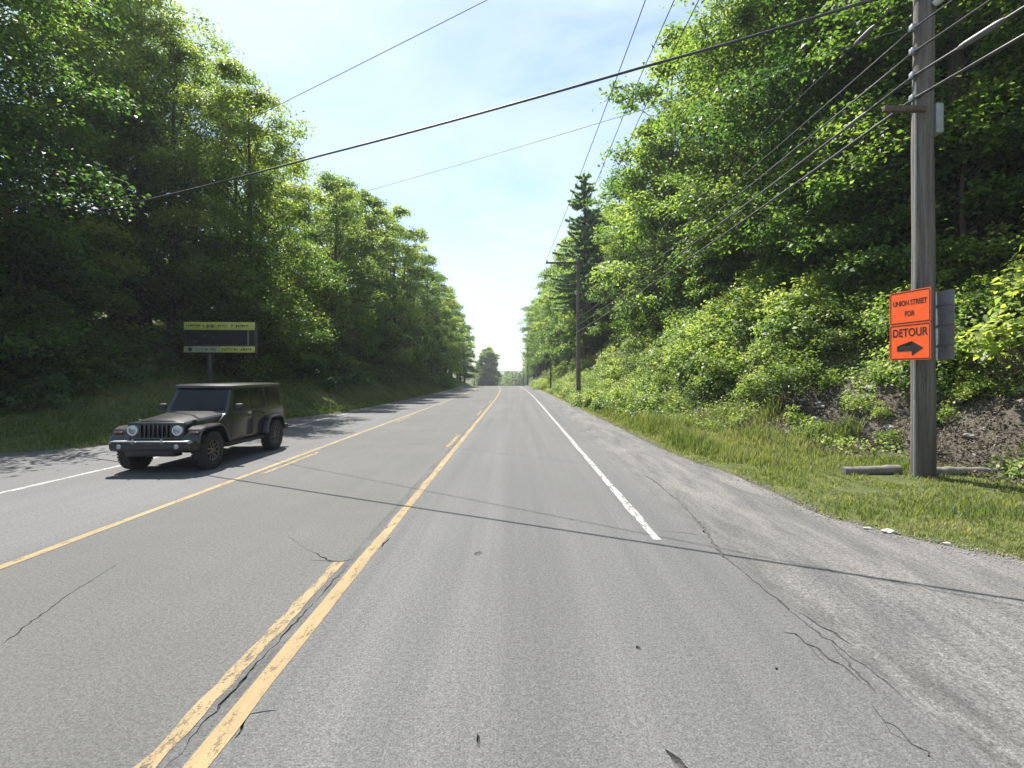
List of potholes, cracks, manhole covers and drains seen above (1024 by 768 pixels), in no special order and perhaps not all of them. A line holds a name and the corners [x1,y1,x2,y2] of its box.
pothole [665,749,688,768]
crack [165,537,354,768]
crack [872,706,936,761]
crack [786,632,864,685]
crack [3,564,117,644]
